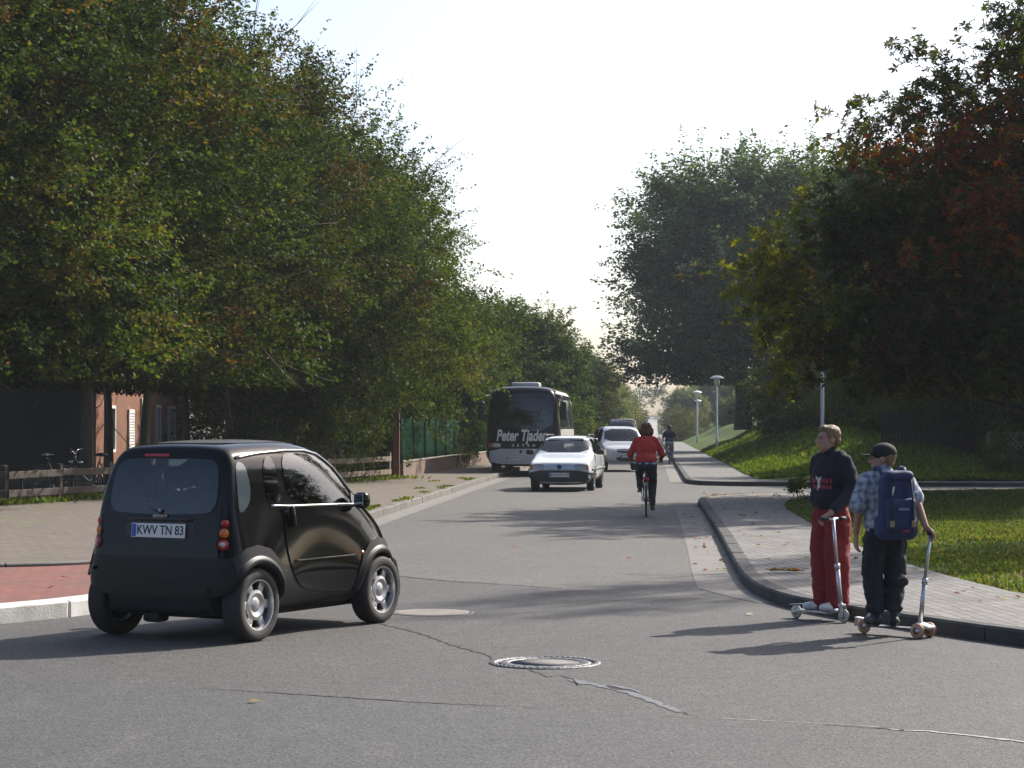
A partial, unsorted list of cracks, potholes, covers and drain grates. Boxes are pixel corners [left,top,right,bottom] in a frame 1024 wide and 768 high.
crack [379,623,703,717]
manhole cover [489,656,601,670]
